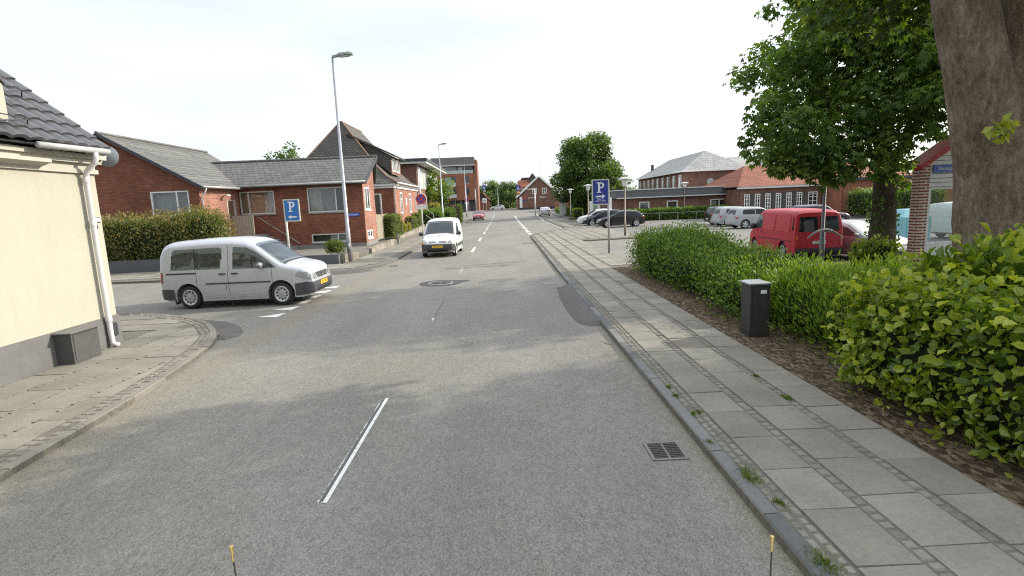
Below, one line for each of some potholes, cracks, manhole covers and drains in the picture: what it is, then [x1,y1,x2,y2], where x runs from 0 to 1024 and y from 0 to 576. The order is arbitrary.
drain grate [643,441,690,461]
